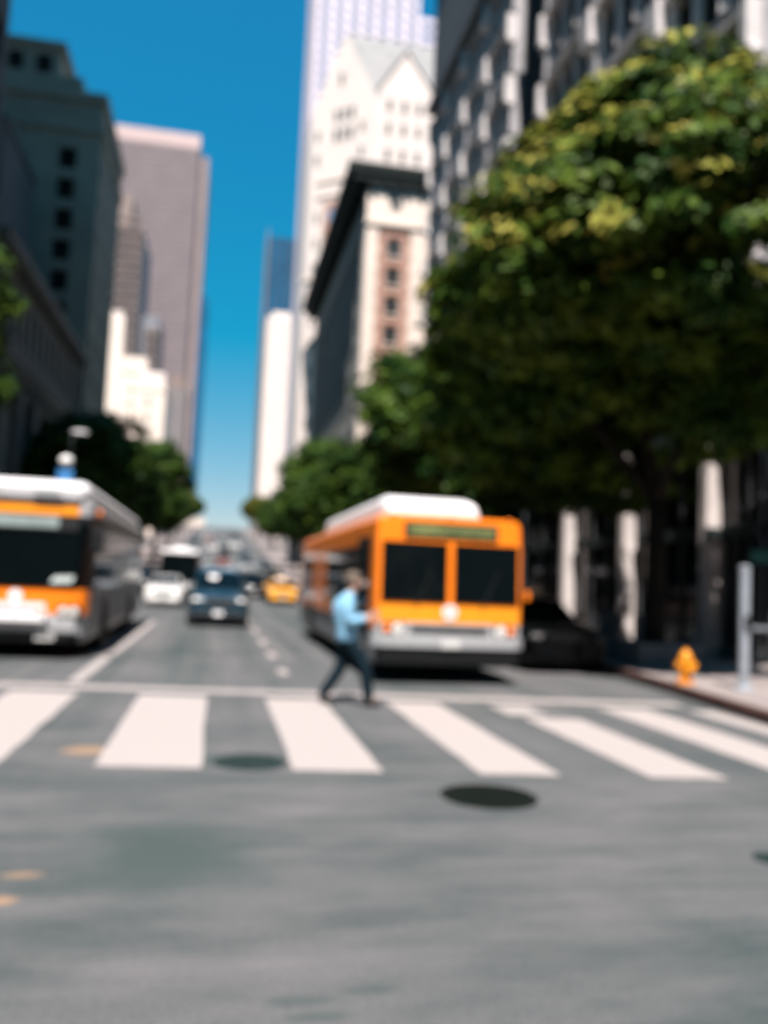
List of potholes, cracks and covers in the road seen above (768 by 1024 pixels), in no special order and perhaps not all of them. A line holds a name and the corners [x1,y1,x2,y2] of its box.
manhole cover [440,784,538,810]
manhole cover [213,754,287,771]
